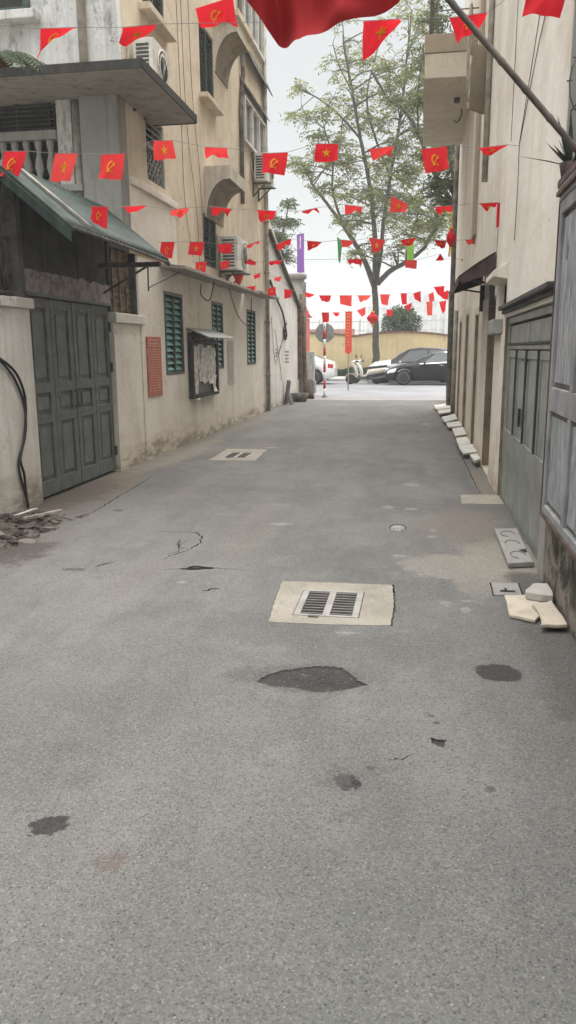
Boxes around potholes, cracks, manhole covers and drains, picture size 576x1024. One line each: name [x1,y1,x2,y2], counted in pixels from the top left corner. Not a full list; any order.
drain grate [268,581,394,626]
drain grate [210,449,267,461]
crack [158,531,241,570]
manhole cover [494,528,534,568]
manhole cover [490,583,523,596]
